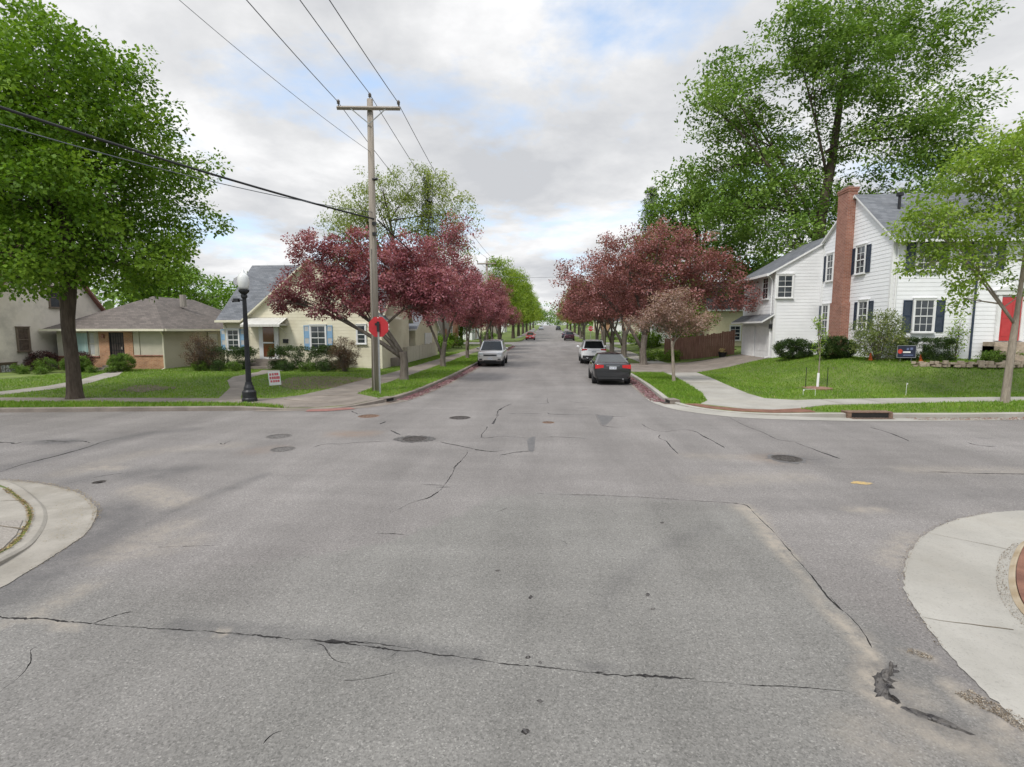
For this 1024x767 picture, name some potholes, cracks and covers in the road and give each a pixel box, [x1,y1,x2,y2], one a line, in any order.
manhole cover [768,454,808,464]
pothole [872,661,901,704]
crack [642,424,724,453]
manhole cover [393,435,436,443]
drain grate [841,410,894,419]
crack [315,404,572,507]
crack [0,611,847,692]
crack [0,440,108,472]
